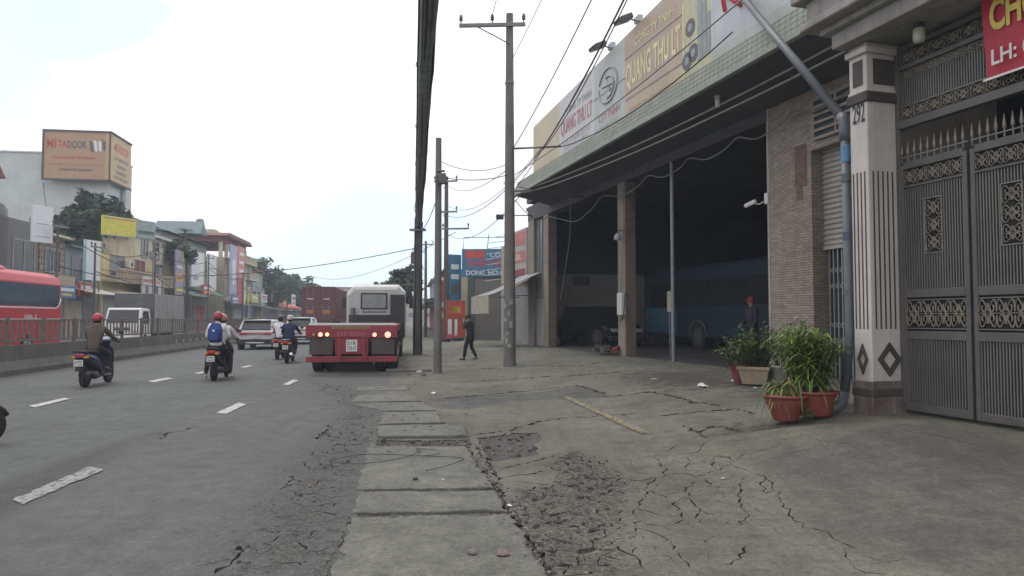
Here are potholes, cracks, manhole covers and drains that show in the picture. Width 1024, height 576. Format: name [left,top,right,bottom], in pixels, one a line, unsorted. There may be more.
crack [445,362,904,576]
crack [214,382,376,575]
pothole [477,433,541,462]
